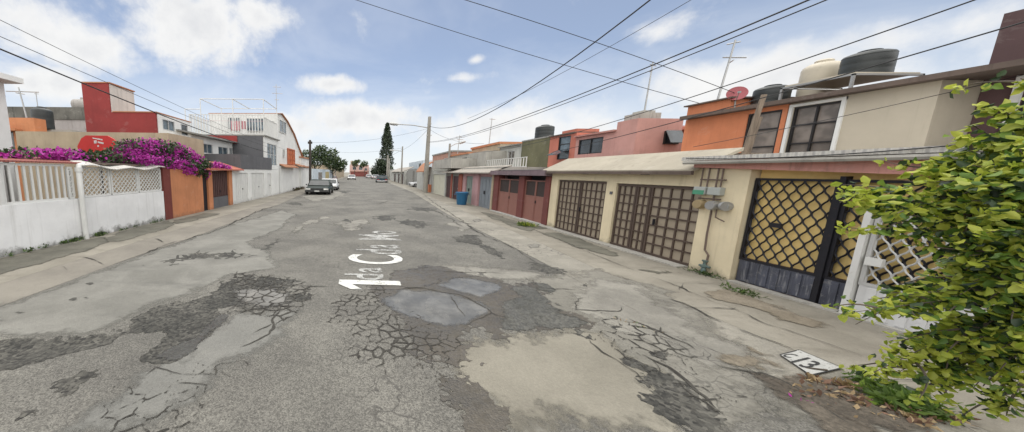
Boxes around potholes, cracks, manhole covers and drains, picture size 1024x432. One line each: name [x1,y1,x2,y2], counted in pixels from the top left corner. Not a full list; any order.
crack [79,272,509,432]
crack [541,287,847,422]
